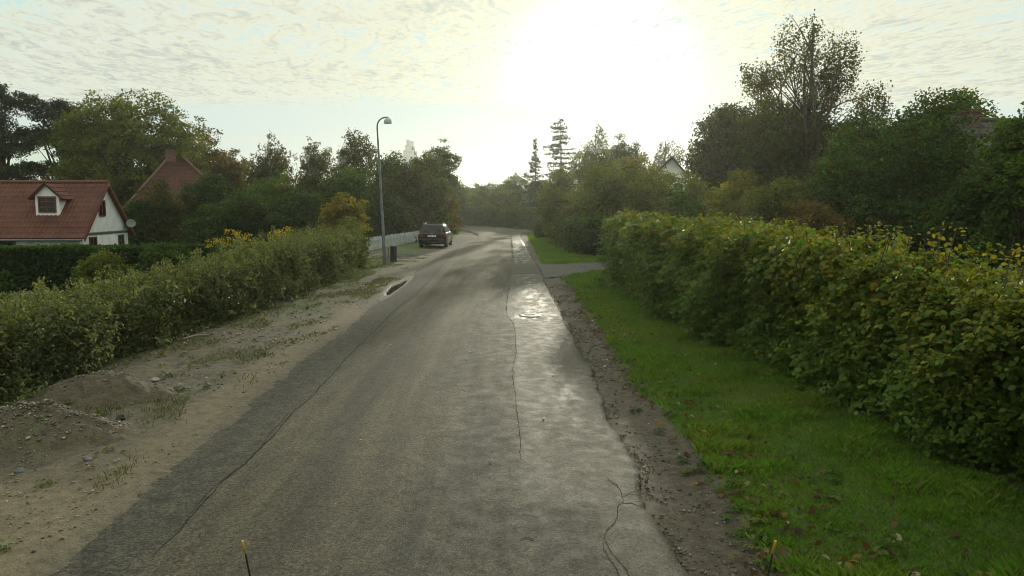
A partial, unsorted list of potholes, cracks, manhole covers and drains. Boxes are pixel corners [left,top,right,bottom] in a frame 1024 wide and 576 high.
crack [603,479,645,575]
crack [506,237,521,449]
